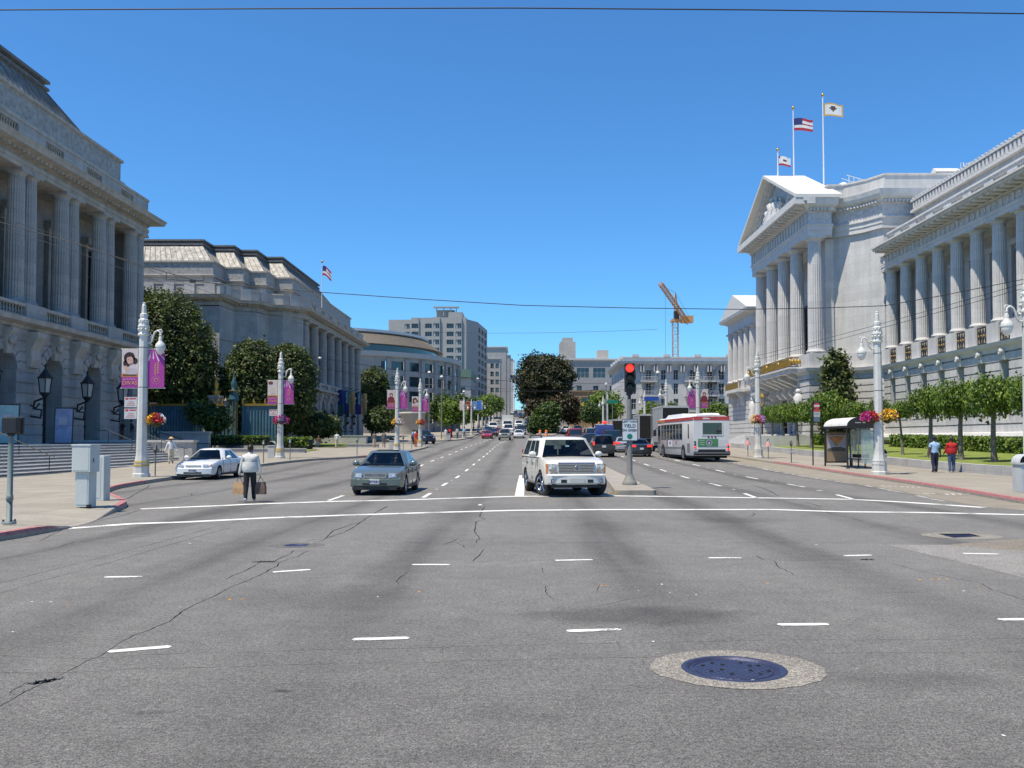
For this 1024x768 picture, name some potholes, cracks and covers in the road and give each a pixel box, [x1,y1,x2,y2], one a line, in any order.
crack [0,506,388,706]
manhole cover [650,650,827,689]
crack [449,507,485,561]
